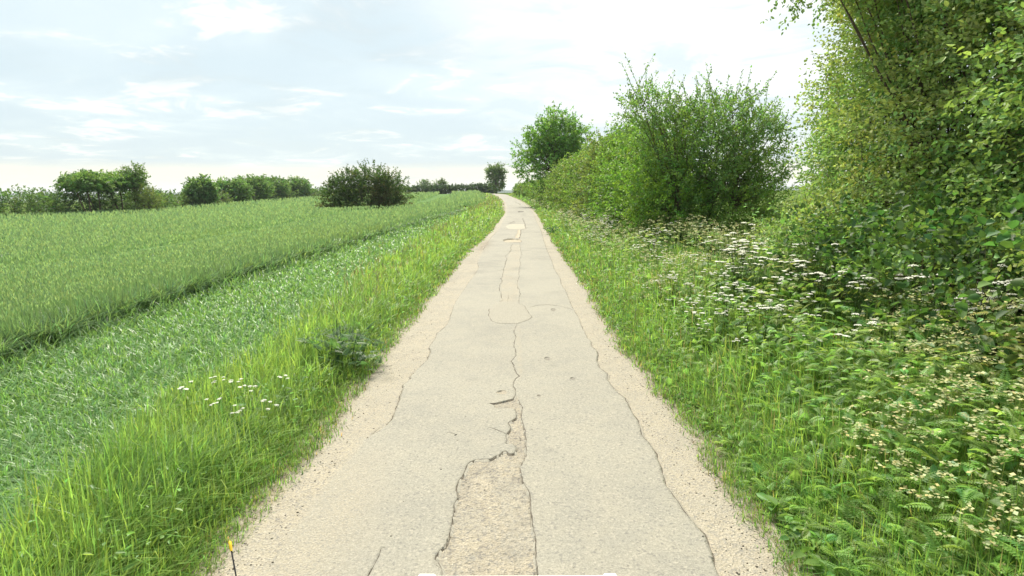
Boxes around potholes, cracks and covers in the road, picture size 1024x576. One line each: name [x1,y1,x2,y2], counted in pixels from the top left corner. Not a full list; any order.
crack [367,203,722,576]
